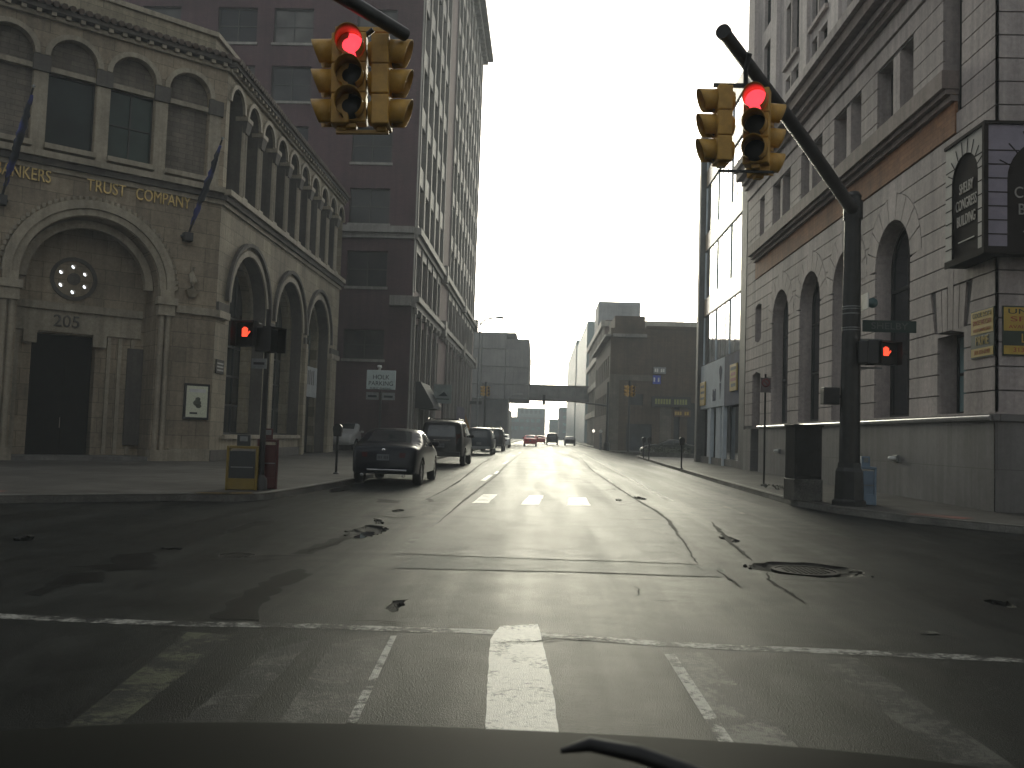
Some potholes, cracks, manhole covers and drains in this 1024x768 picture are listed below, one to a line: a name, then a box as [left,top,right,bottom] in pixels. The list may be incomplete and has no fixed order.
pothole [343,525,389,539]
manhole cover [771,565,840,578]
pothole [984,599,1017,608]
pothole [385,599,408,613]
